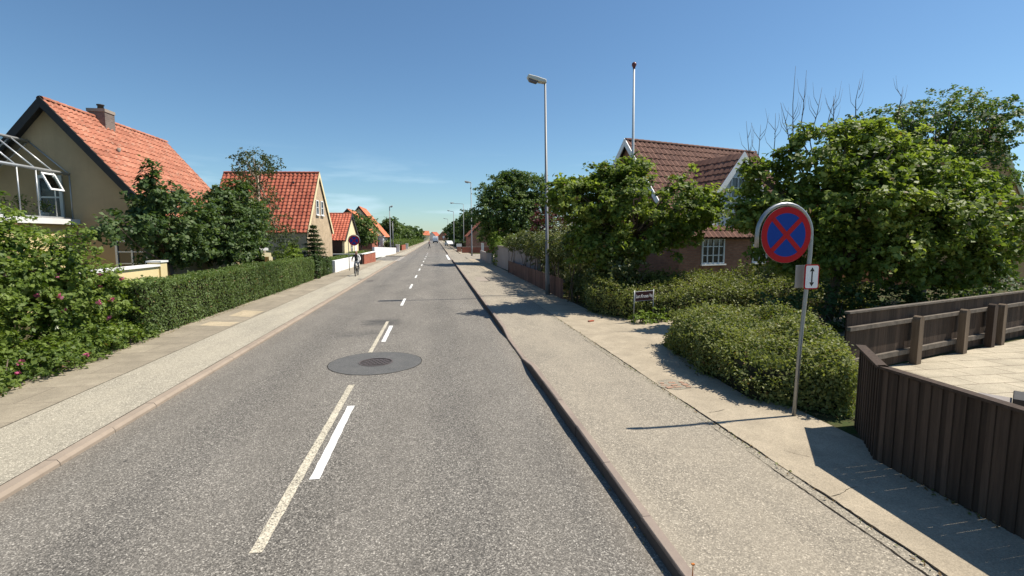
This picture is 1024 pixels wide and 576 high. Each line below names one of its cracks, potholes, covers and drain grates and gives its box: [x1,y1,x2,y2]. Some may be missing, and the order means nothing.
manhole cover [359,358,393,366]
